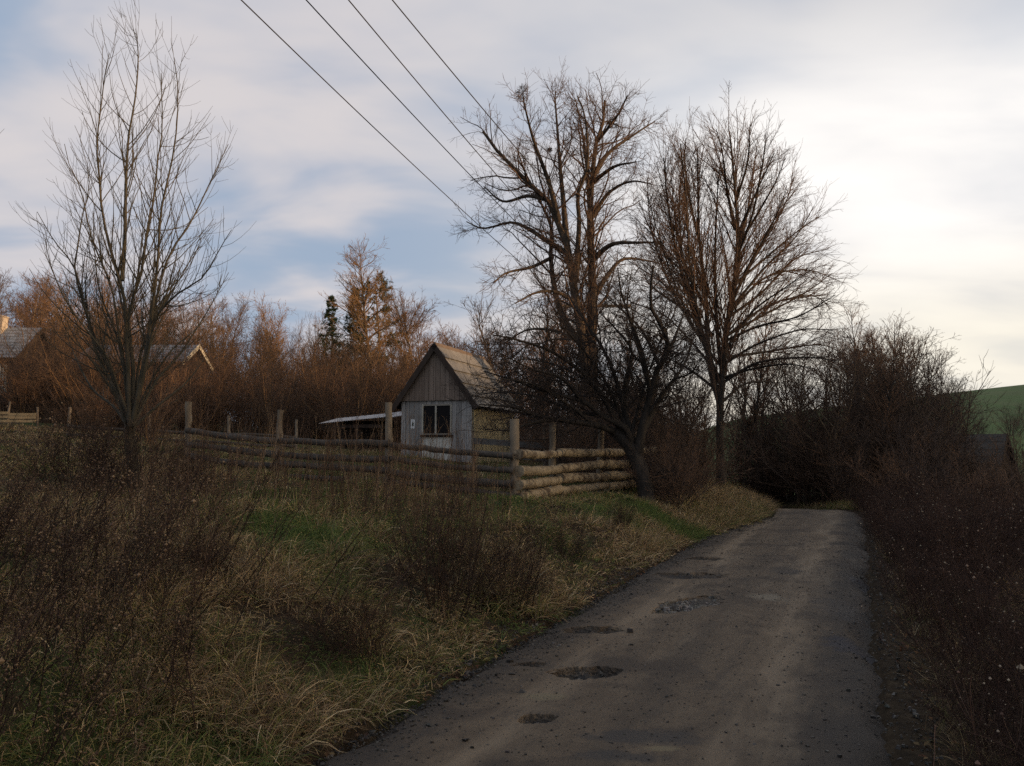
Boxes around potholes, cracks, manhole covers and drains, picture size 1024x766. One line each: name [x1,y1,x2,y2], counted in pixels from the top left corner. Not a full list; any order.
pothole [545,623,640,636]
pothole [642,593,733,615]
pothole [532,663,636,684]
pothole [490,659,563,673]
pothole [501,709,573,729]
pothole [642,571,738,580]
